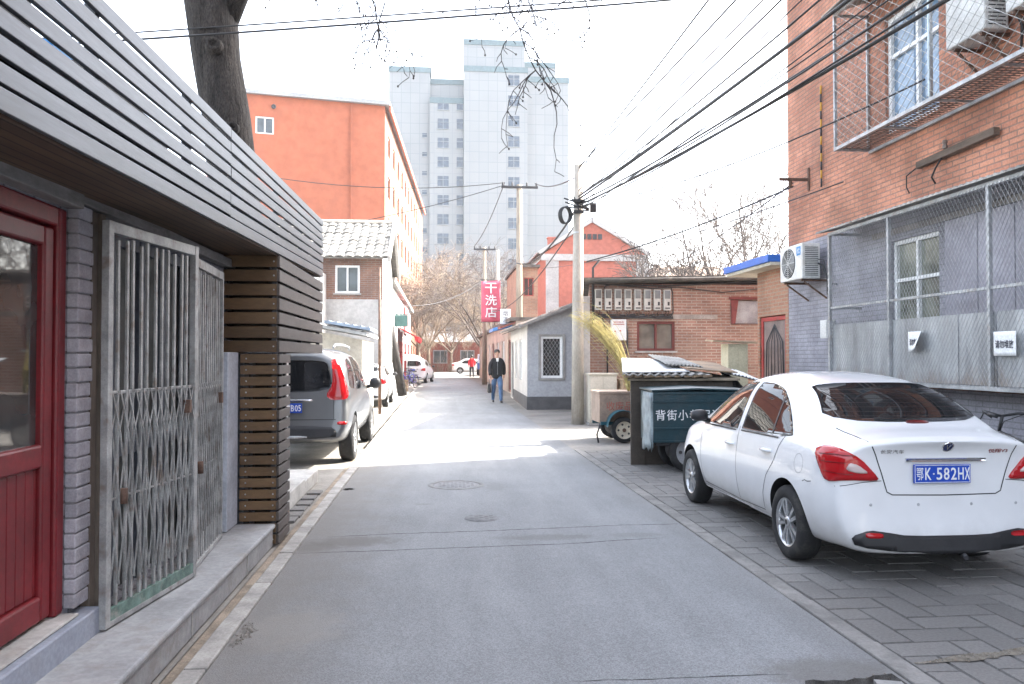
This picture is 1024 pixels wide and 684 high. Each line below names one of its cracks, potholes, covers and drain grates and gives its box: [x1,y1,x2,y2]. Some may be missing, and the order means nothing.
manhole cover [428,480,484,490]
manhole cover [464,514,498,522]
